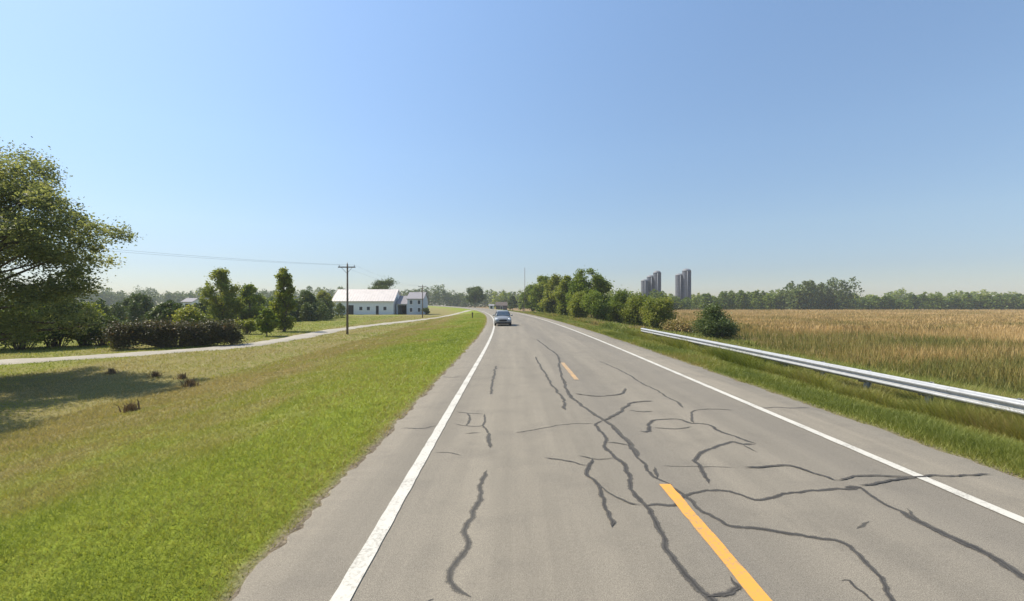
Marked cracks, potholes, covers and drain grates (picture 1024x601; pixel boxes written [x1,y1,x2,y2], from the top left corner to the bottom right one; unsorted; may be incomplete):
crack [490,366,498,394]
crack [517,340,1024,601]
crack [454,412,492,448]
crack [428,452,488,601]
